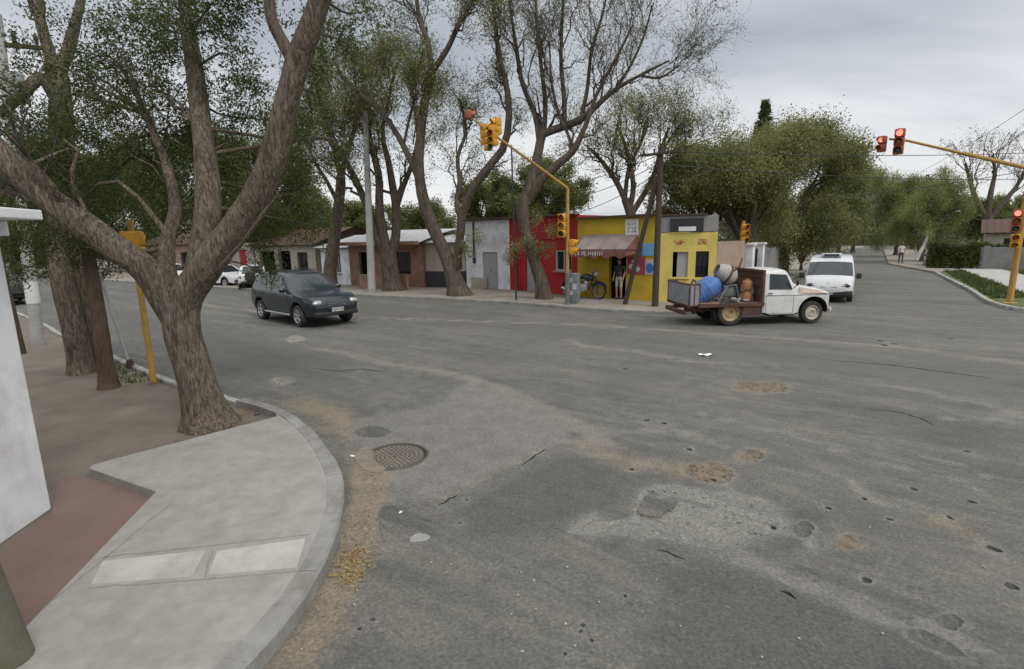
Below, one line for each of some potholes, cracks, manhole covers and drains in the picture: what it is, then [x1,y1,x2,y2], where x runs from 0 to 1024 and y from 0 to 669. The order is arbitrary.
pothole [681,462,736,484]
pothole [733,381,788,394]
manhole cover [372,443,429,471]
pothole [736,449,764,461]
crack [835,360,987,378]
pothole [833,534,861,551]
